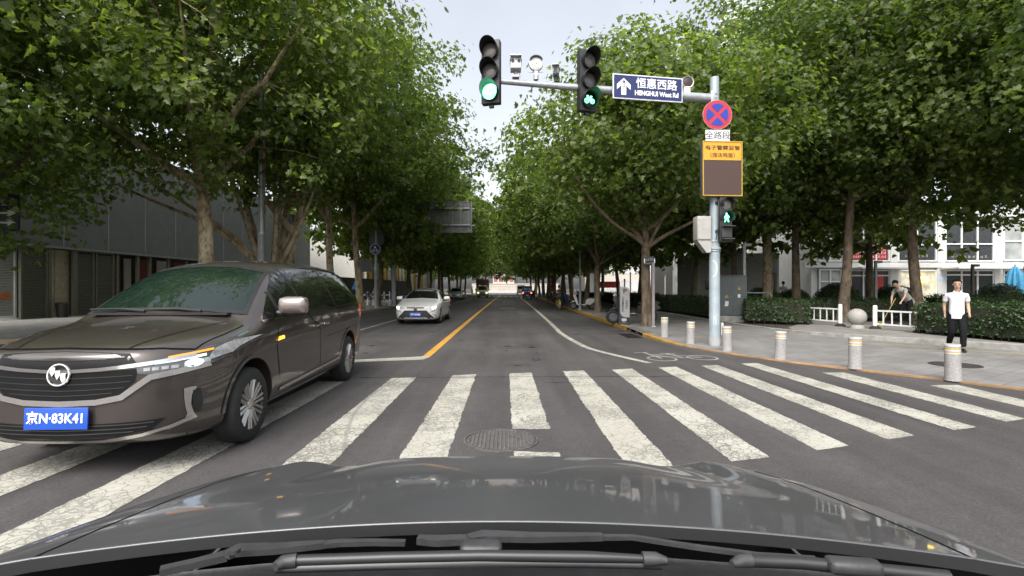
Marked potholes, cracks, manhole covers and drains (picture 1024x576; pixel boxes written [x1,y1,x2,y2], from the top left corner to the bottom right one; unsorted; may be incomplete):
manhole cover [463,429,538,453]
